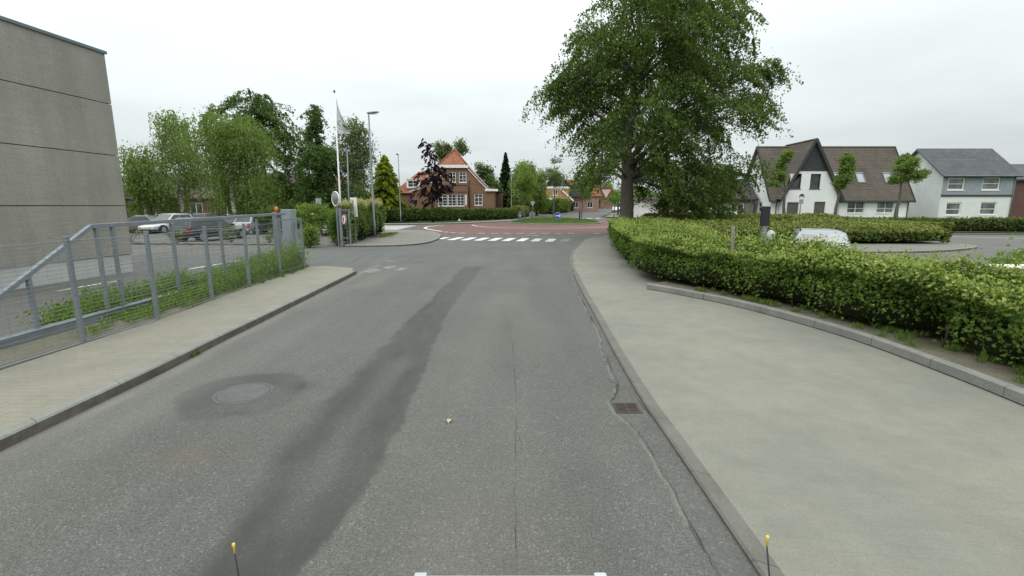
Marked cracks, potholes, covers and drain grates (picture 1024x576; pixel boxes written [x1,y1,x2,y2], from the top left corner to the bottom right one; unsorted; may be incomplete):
crack [621,401,720,575]
manhole cover [212,383,274,405]
drain grate [612,403,643,414]
crack [506,318,522,574]
